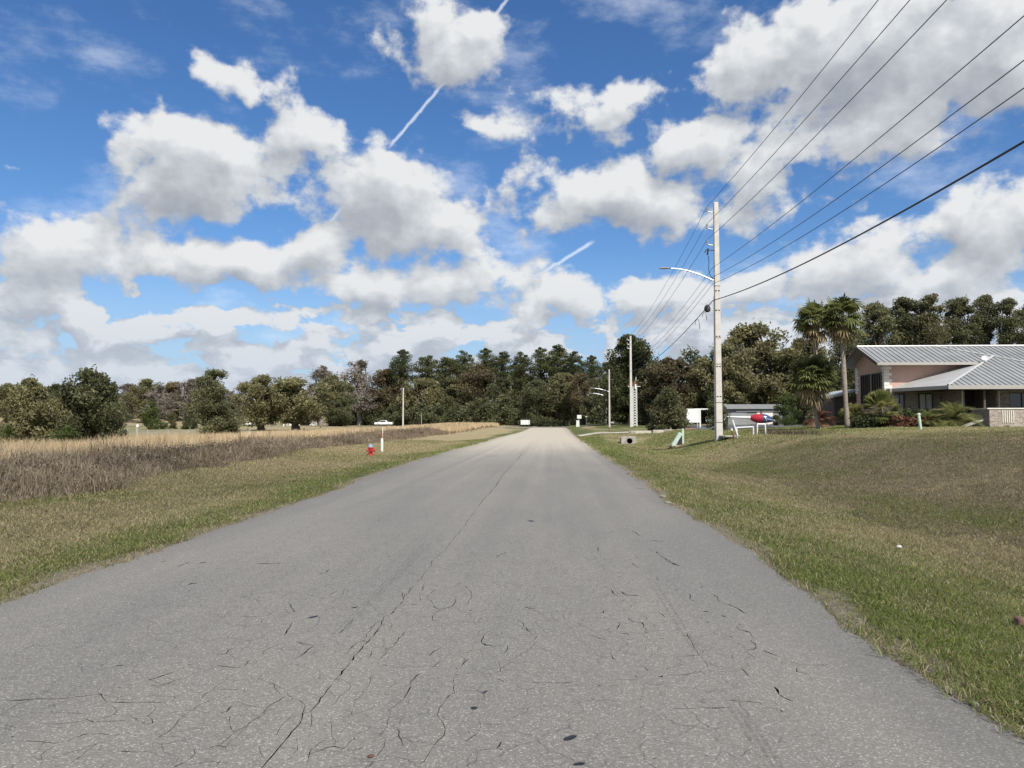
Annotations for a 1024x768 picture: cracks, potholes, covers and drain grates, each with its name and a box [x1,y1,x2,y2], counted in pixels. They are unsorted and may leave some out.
crack [464,682,570,764]
crack [3,455,521,768]
crack [592,591,810,718]
